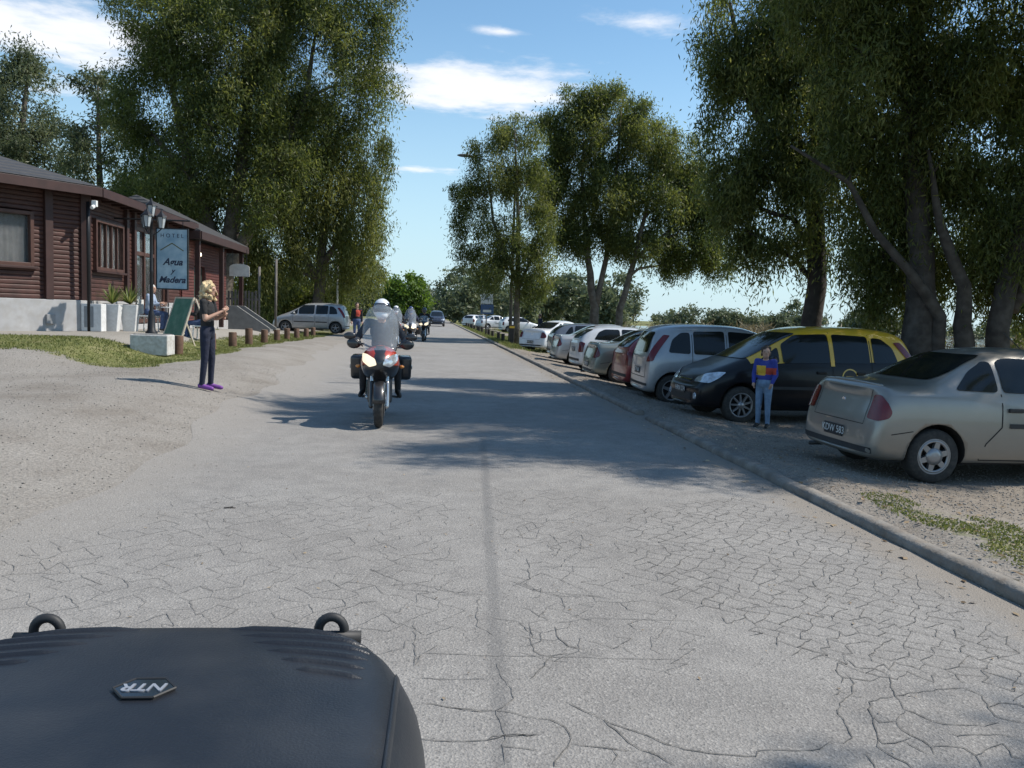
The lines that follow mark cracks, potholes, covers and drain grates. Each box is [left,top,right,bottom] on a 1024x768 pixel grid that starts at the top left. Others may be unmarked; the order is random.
crack [2,485,1024,768]
